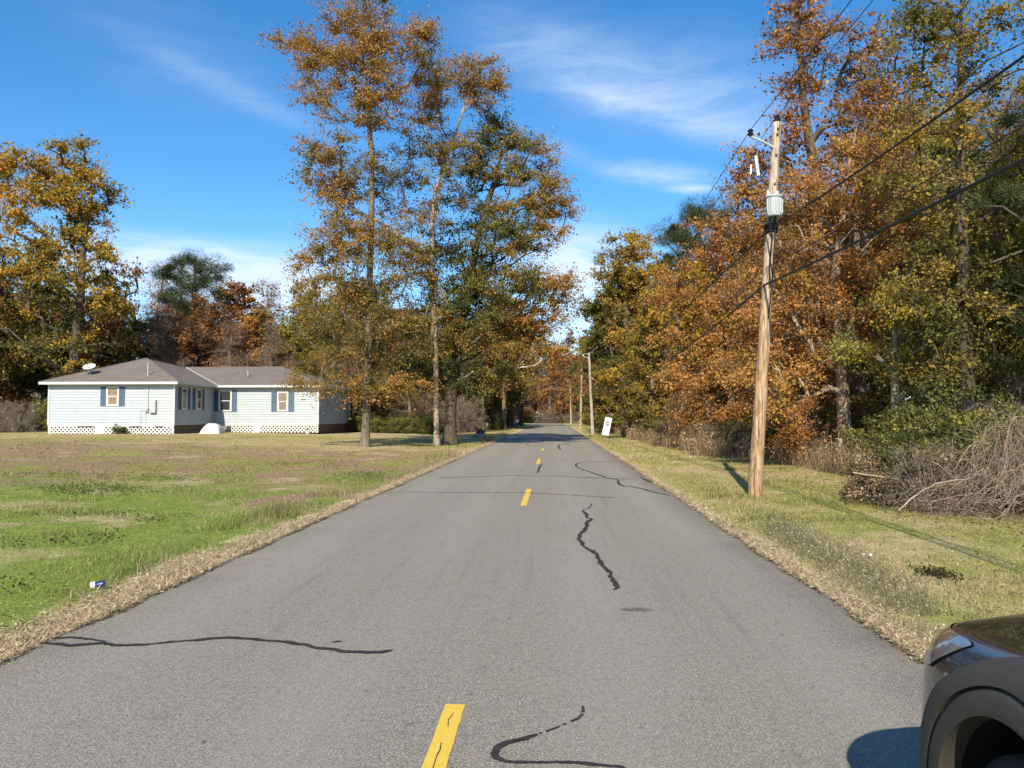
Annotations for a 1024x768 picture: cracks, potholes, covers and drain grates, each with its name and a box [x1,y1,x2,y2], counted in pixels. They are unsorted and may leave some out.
crack [440,443,651,498]
